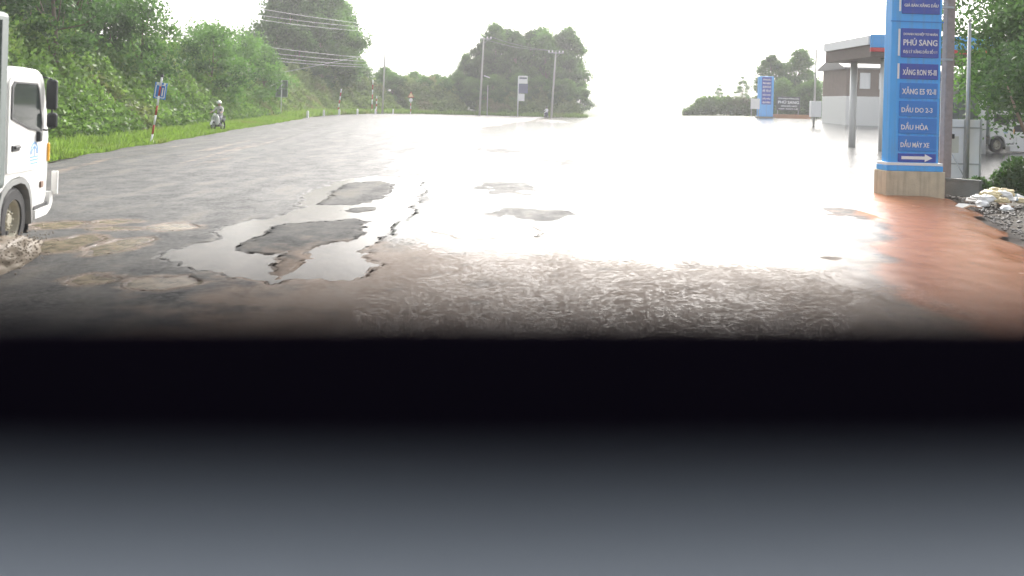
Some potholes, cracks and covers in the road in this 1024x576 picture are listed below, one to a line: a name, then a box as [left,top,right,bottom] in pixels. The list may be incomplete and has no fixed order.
pothole [156,175,427,269]
